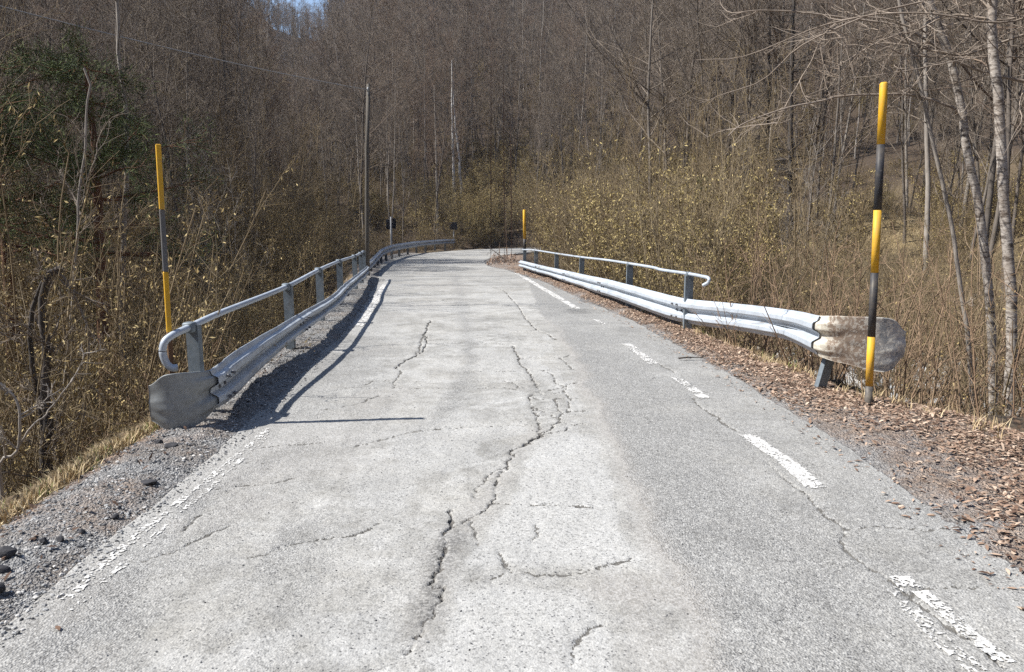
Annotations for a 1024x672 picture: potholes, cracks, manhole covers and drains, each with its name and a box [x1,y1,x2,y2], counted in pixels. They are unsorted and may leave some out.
crack [659,364,1004,669]
crack [570,625,603,665]
crack [141,515,231,563]
crack [325,320,590,656]
crack [470,553,632,582]
crack [247,523,380,559]
